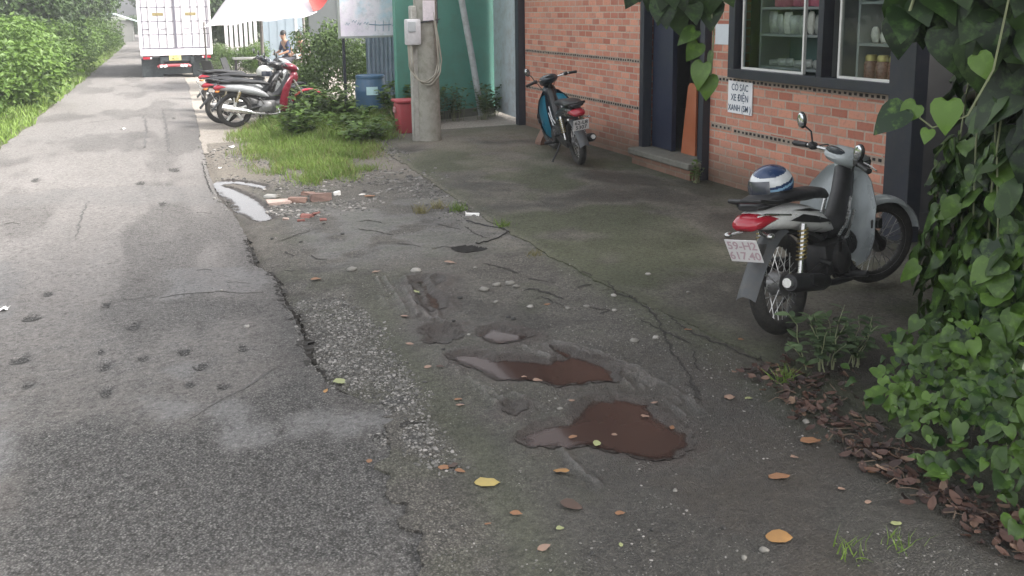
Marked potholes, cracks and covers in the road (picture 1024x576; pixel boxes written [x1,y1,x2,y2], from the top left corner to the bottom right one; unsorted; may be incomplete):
pothole [515,393,696,461]
crack [75,201,90,237]
pothole [452,245,487,253]
pothole [408,273,449,311]
crack [129,231,424,441]
crack [483,263,762,401]
pothole [444,344,623,387]
pothole [418,320,464,344]
